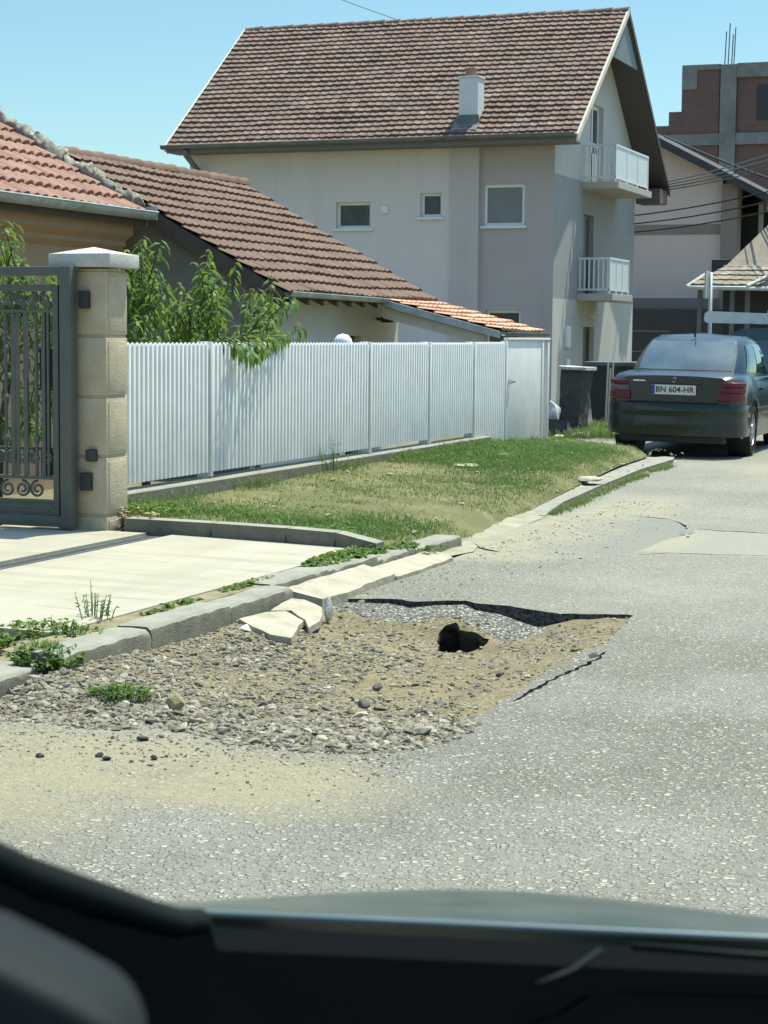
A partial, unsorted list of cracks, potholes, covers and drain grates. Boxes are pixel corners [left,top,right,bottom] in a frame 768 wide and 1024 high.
crack [511,651,607,702]
pothole [0,598,633,750]
